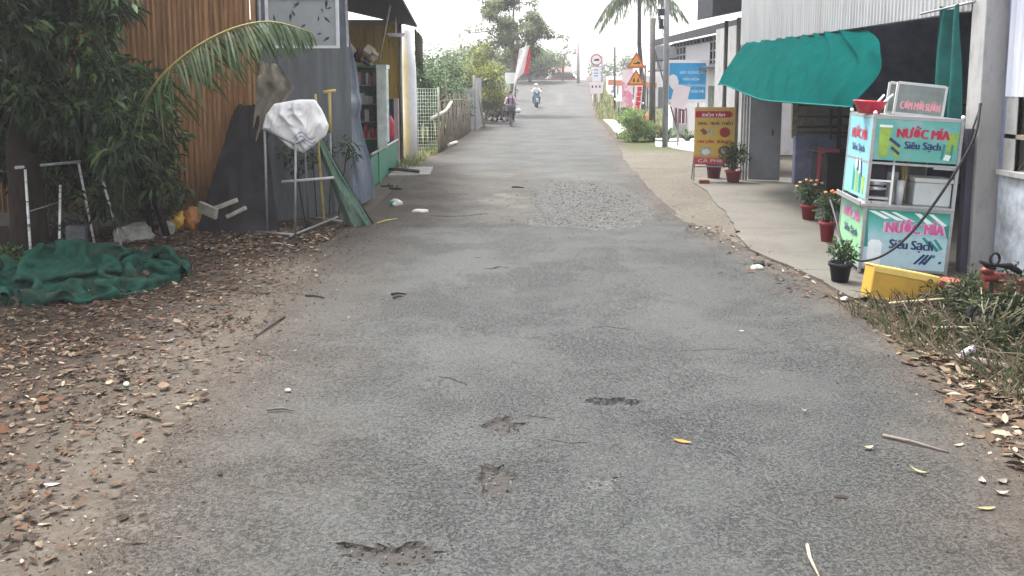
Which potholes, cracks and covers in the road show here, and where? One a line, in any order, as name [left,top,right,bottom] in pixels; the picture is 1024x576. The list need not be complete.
pothole [584,397,642,407]
pothole [475,464,517,502]
pothole [480,416,527,436]
pothole [336,541,445,570]
